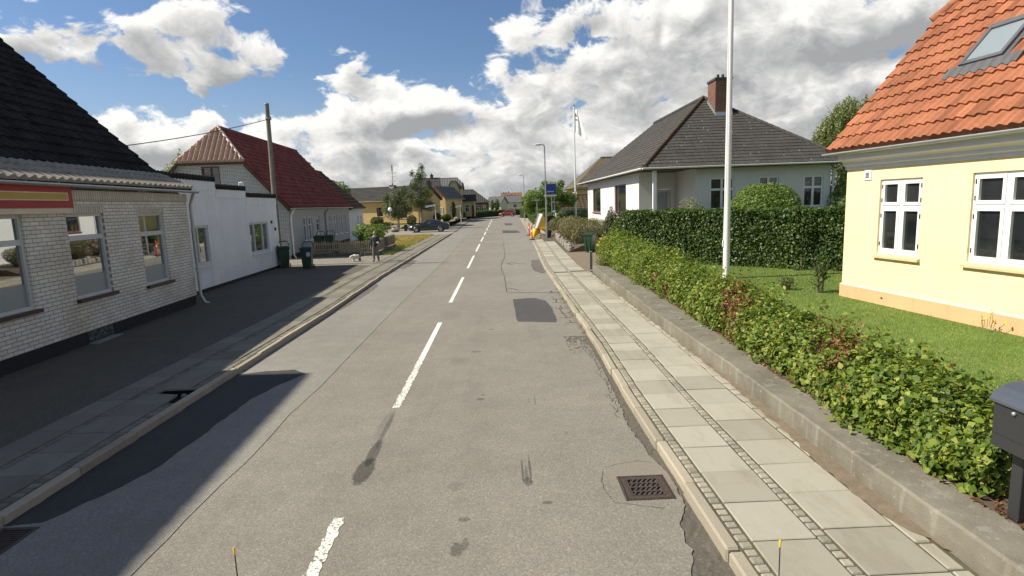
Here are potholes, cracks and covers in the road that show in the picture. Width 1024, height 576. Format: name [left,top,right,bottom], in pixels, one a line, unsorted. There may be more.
drain grate [0,526,41,555]
drain grate [616,474,676,501]
crack [551,292,620,414]
